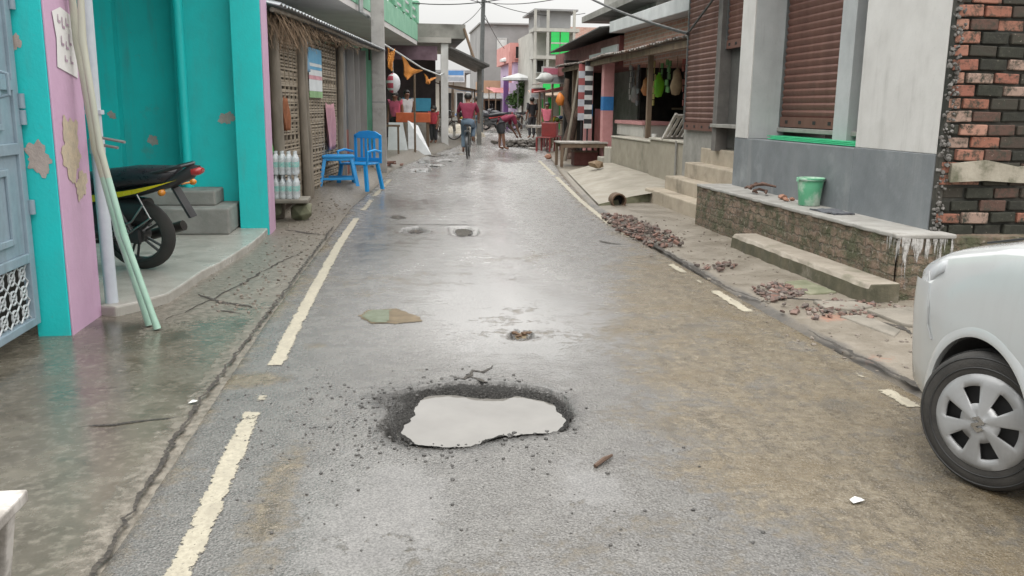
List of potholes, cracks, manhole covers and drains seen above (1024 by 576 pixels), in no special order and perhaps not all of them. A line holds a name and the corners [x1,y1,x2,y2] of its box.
pothole [390,382,574,449]
pothole [453,228,474,237]
